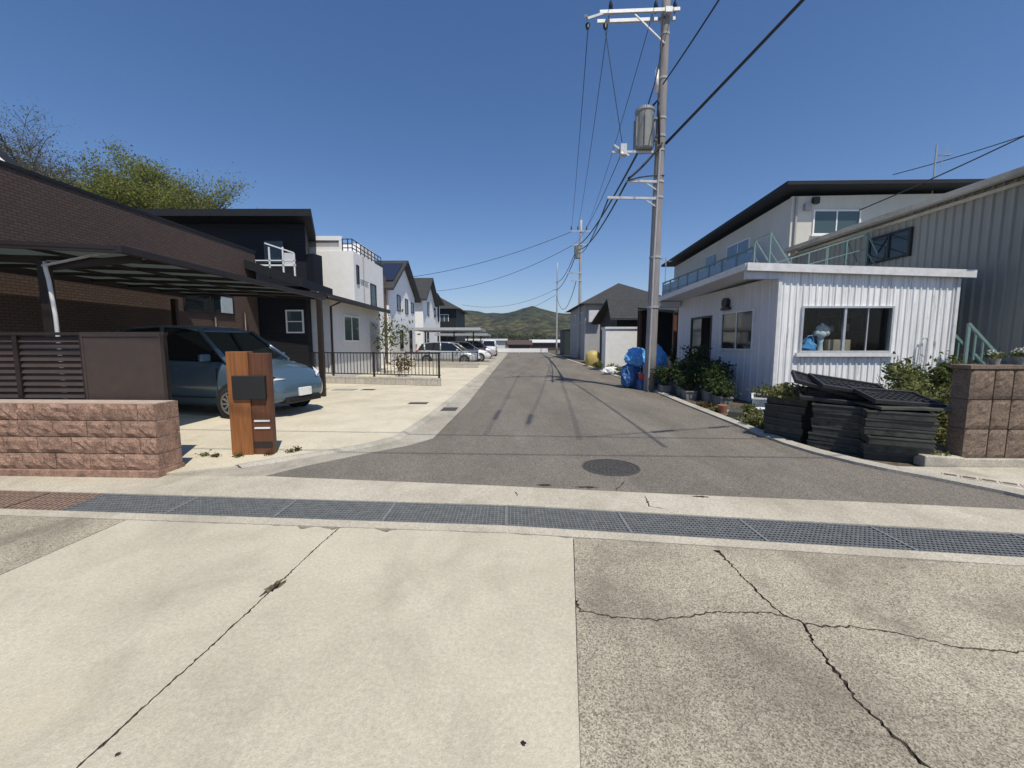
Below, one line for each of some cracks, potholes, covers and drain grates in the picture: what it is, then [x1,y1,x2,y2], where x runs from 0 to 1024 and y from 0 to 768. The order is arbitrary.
drain grate [619,512,769,542]
drain grate [60,494,199,514]
manhole cover [582,459,640,476]
drain grate [383,502,506,526]
drain grate [272,499,395,521]
drain grate [165,496,297,518]
drain grate [506,506,631,533]
drain grate [871,526,1024,558]
drain grate [739,518,918,551]
crack [575,550,1024,768]
pothole [259,579,286,597]
crack [76,527,340,768]
